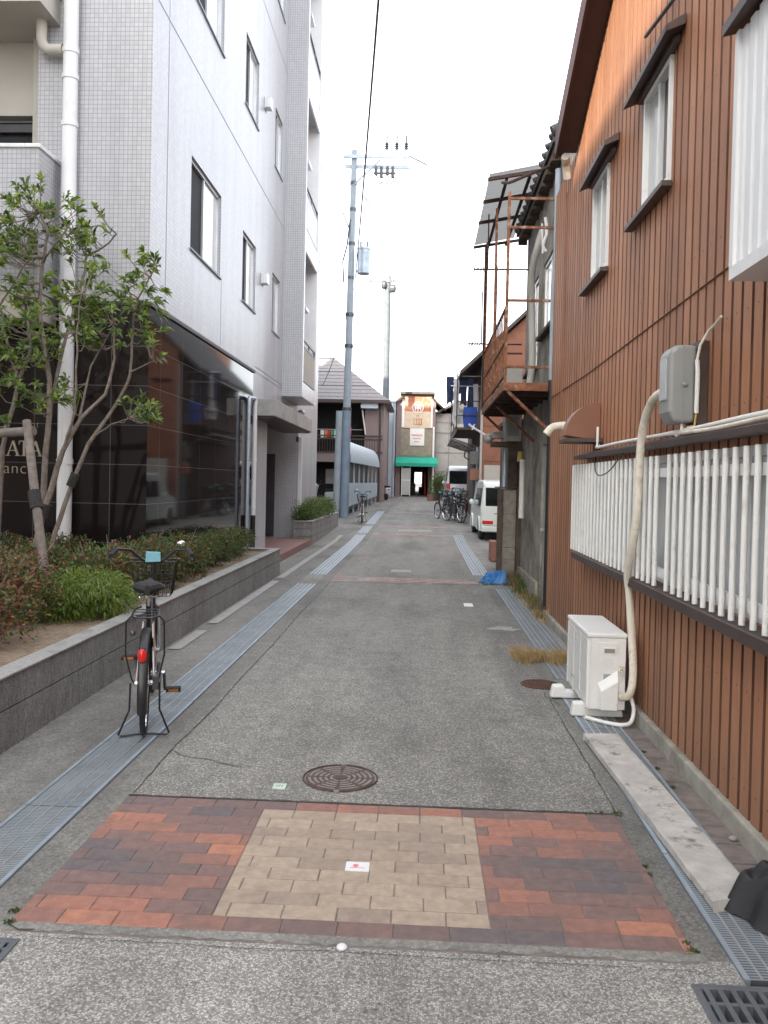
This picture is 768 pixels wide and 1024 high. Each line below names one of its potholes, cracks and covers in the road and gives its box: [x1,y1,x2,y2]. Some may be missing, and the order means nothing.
drain grate [691,983,768,1024]
drain grate [0,938,20,962]
manhole cover [302,763,378,793]
manhole cover [521,679,557,690]
